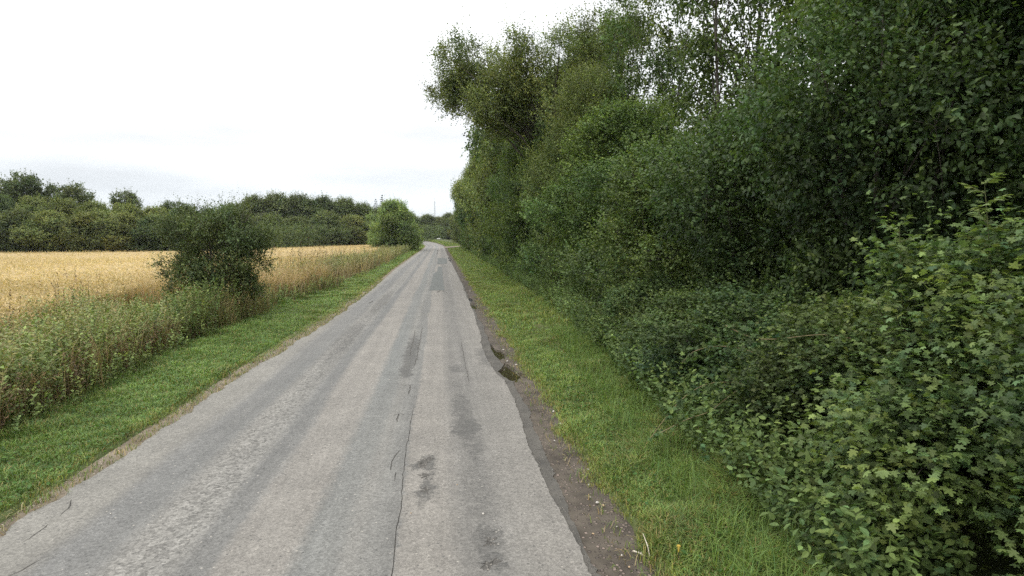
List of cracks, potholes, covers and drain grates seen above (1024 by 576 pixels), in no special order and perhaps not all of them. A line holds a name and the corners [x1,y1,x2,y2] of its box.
pothole [490,345,507,361]
pothole [498,363,522,382]
